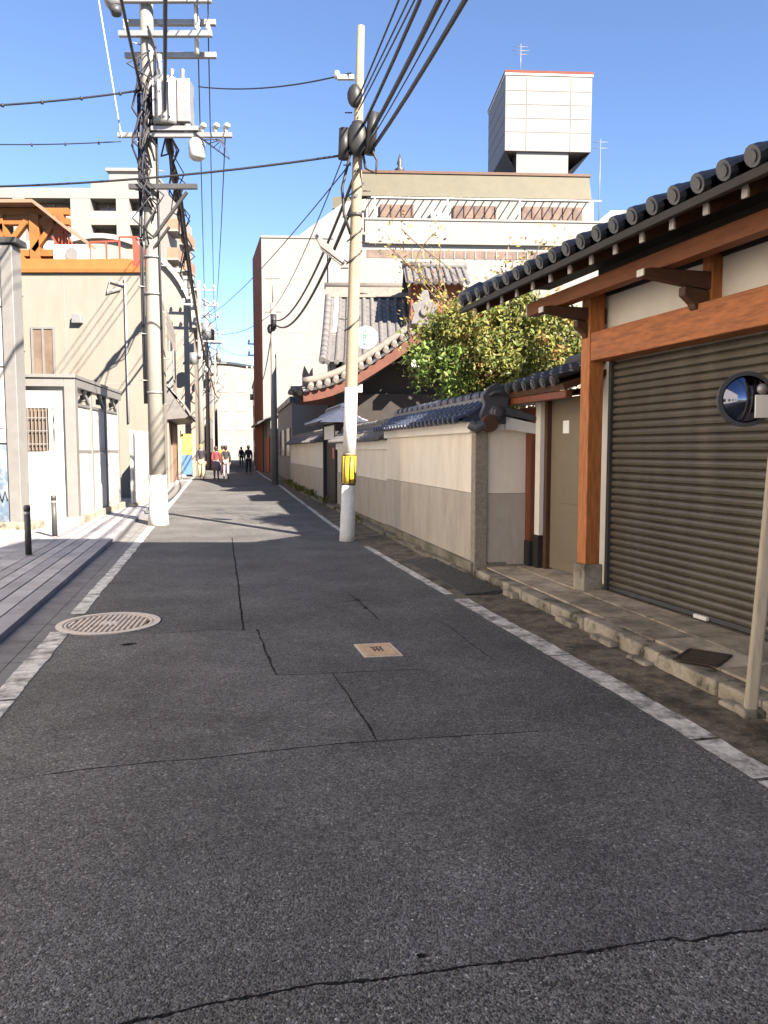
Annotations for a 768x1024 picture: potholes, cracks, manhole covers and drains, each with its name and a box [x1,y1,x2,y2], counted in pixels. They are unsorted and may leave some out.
crack [5,538,550,781]
crack [119,928,768,1024]
manhole cover [55,612,161,635]
manhole cover [354,643,403,658]
